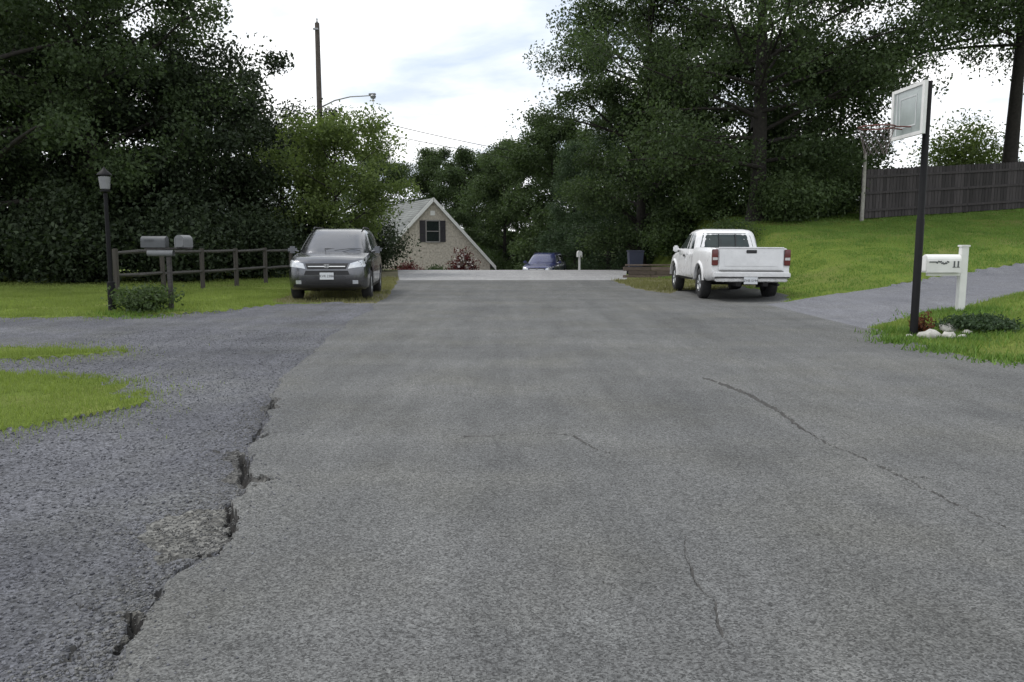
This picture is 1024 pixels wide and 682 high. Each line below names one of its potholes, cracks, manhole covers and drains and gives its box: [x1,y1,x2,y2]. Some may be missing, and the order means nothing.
crack [75,562,193,616]
crack [463,434,610,454]
crack [684,536,737,648]
crack [212,425,269,463]
